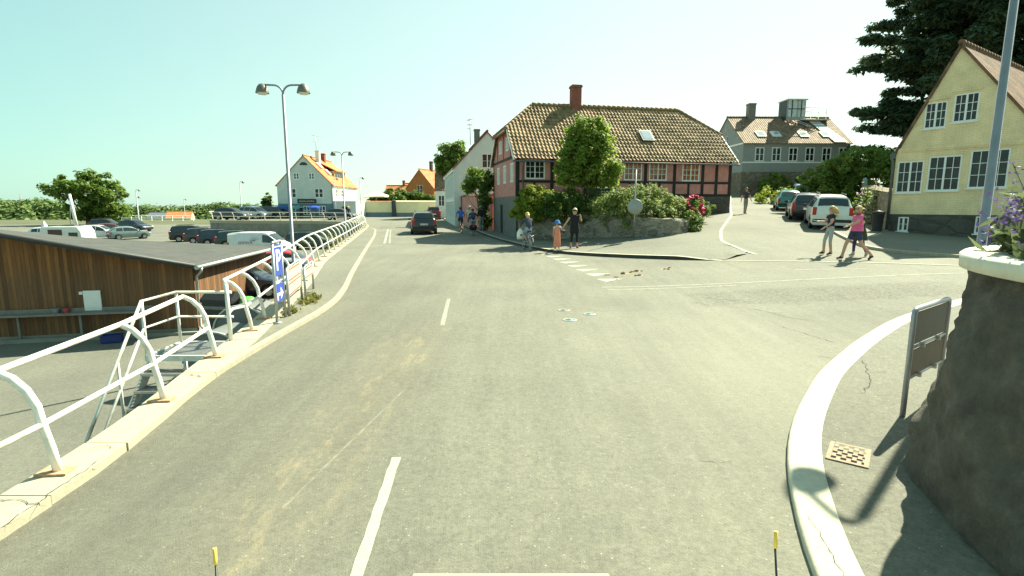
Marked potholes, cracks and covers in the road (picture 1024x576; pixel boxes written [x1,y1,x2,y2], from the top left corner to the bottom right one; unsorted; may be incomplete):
drain grate [825,441,871,469]
